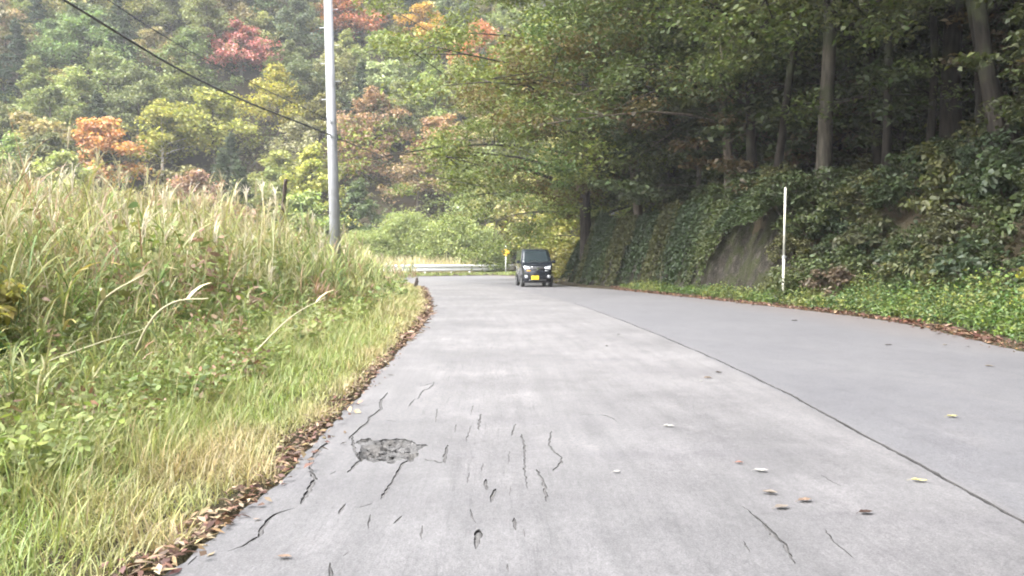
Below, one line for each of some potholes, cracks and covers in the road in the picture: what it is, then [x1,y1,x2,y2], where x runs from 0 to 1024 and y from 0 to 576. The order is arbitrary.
crack [744,507,796,564]
crack [229,393,389,551]
crack [467,424,563,549]
crack [362,461,407,528]
pothole [356,438,428,464]
crack [425,405,481,463]
